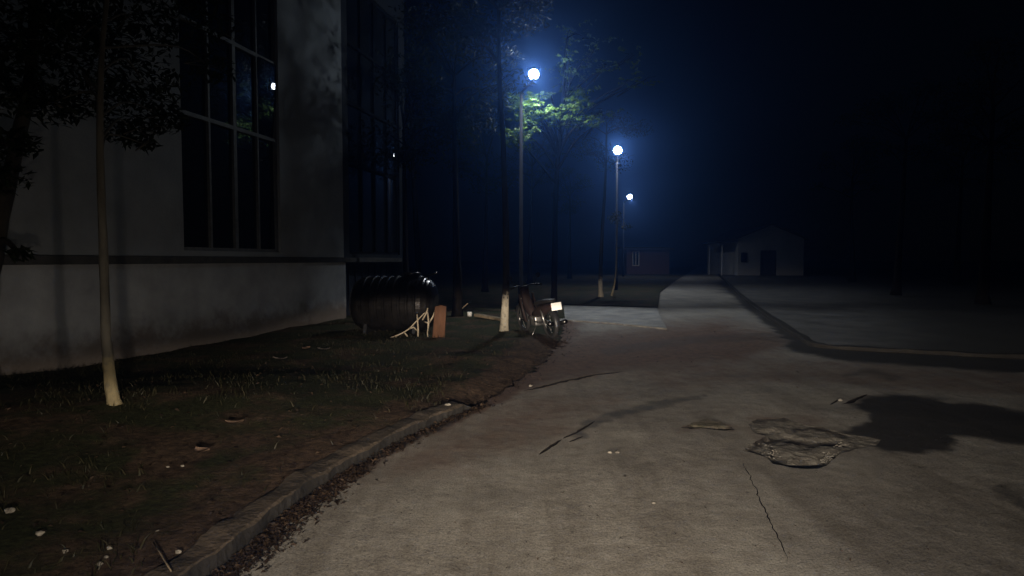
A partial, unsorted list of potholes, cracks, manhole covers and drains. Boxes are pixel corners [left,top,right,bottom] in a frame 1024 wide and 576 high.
crack [540,421,595,454]
crack [743,463,788,558]
pothole [681,419,735,431]
pothole [743,418,880,469]
